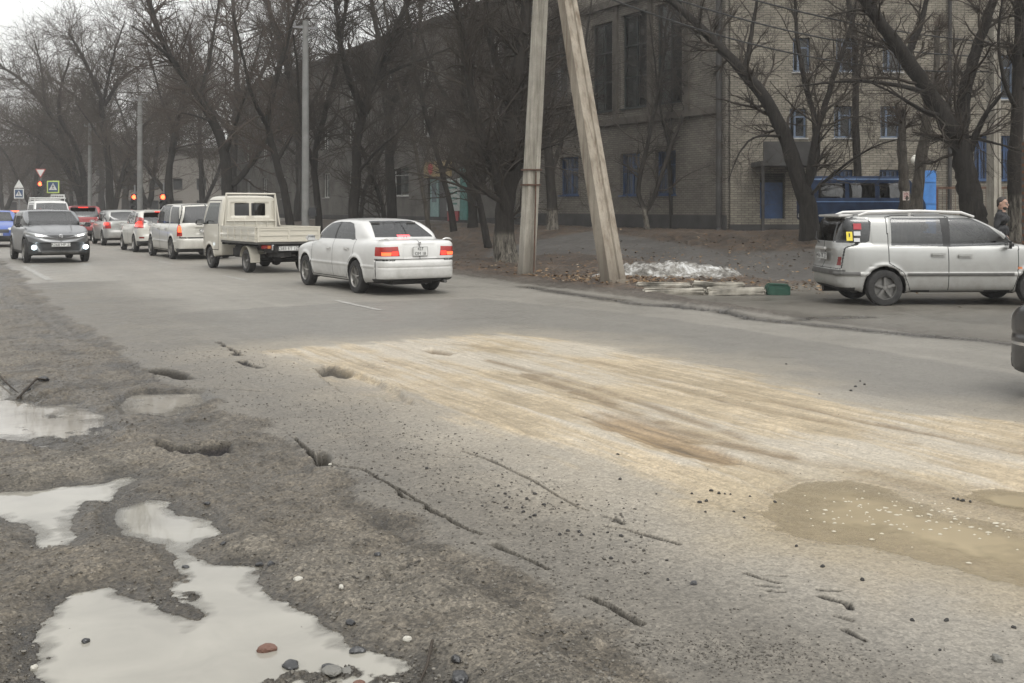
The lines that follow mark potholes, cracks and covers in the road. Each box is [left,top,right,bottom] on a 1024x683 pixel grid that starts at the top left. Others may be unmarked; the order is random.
pothole [753,478,1024,591]
crack [292,436,685,571]
pothole [149,437,239,457]
crack [214,341,267,369]
pothole [115,389,208,417]
crack [740,571,789,594]
crack [813,587,871,643]
crack [583,594,648,627]
pothole [141,366,202,380]
